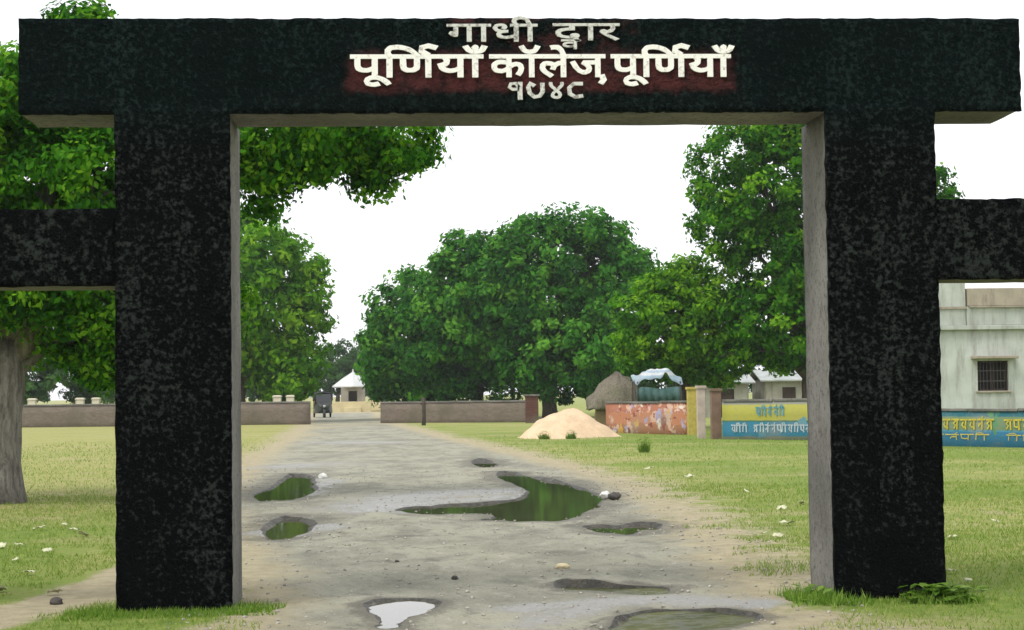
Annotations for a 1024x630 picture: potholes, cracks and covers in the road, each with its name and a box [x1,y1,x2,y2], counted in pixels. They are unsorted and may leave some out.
pothole [608,608,764,630]
pothole [471,458,499,467]
pothole [362,598,442,629]
pothole [582,522,663,535]
pothole [395,471,606,522]
pothole [553,578,670,595]
pothole [252,473,319,502]
pothole [260,515,318,540]
